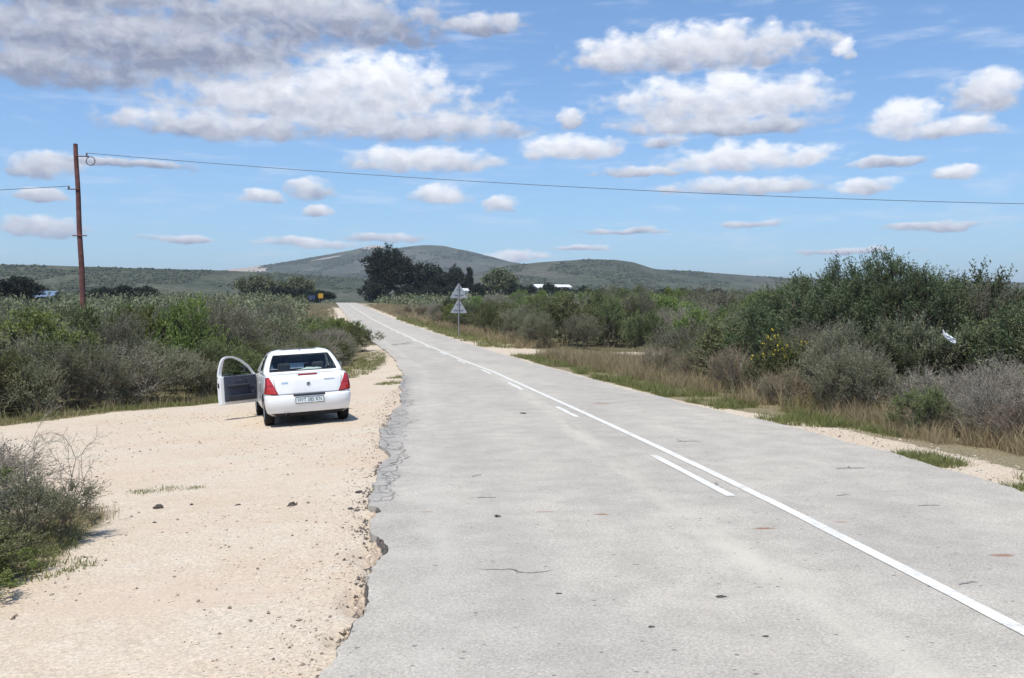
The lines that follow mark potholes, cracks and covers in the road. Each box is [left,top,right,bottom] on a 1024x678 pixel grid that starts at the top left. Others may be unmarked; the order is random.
crack [376,376,417,501]
pothole [363,537,388,570]
